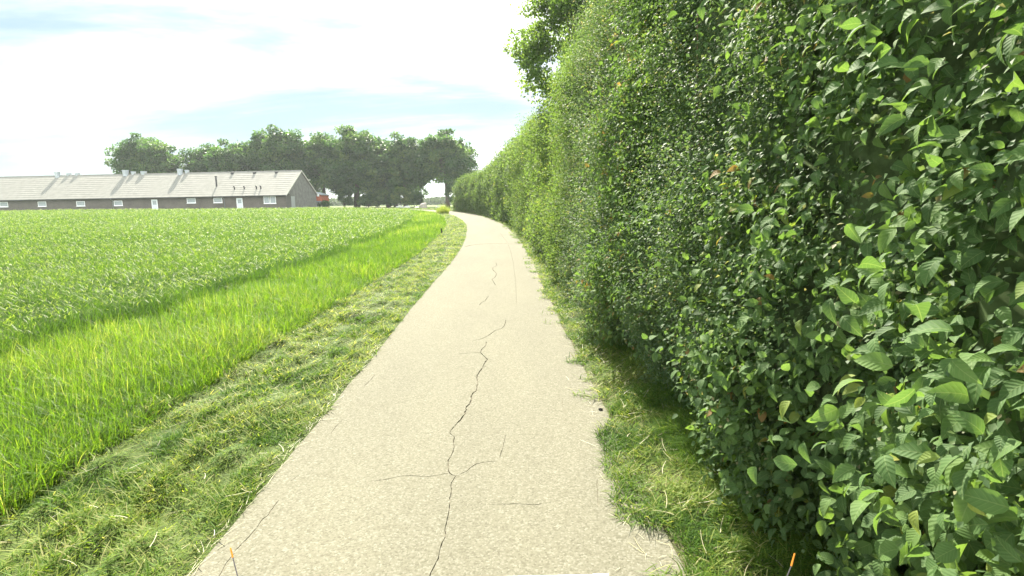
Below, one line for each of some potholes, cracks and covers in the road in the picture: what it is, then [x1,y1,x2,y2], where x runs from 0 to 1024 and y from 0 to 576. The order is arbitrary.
crack [375,264,506,576]
